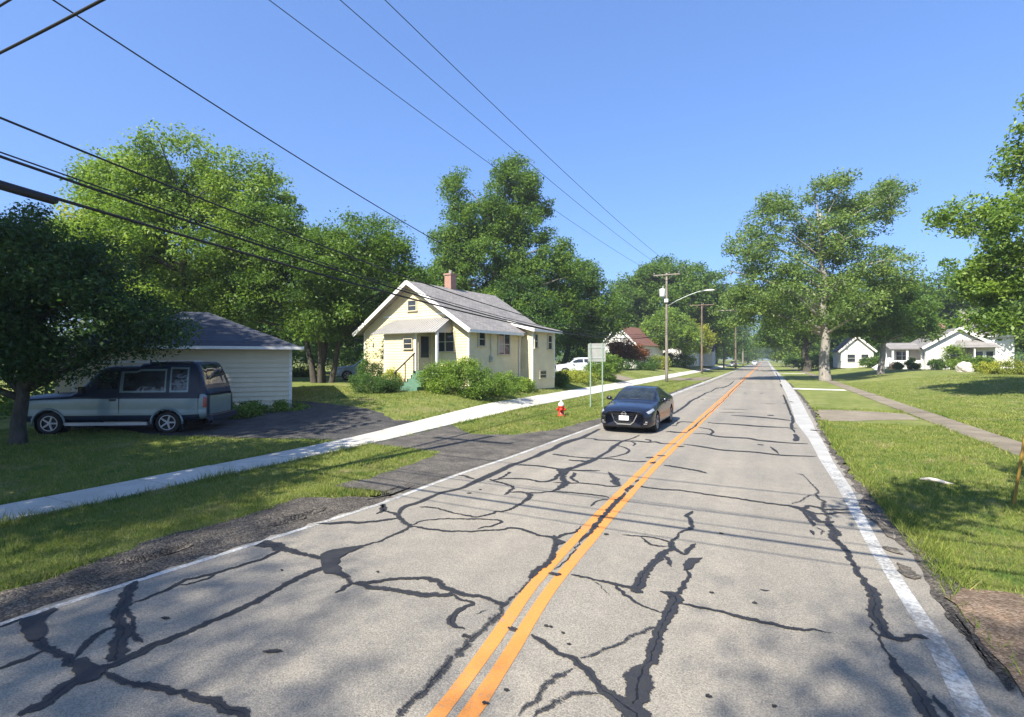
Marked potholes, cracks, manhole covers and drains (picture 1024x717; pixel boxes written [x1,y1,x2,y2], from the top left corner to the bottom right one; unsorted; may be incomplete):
crack [554,439,695,612]
crack [791,474,848,534]
crack [518,667,603,717]
crack [676,373,744,434]
